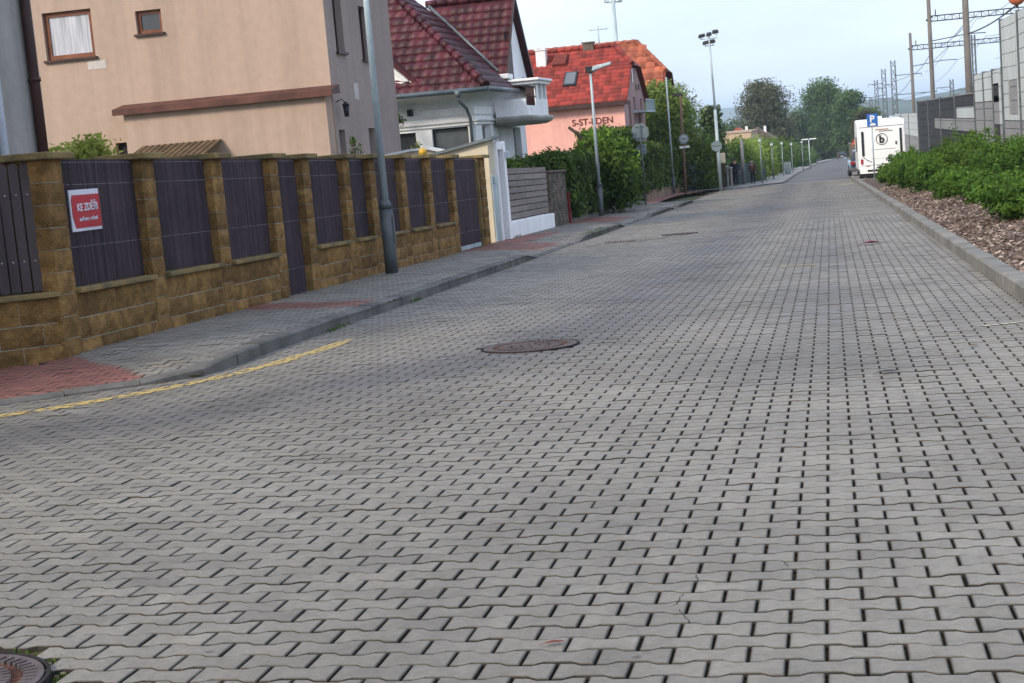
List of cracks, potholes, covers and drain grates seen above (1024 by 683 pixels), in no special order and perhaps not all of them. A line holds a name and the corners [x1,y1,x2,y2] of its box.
manhole cover [0,652,52,683]
manhole cover [480,339,580,354]
